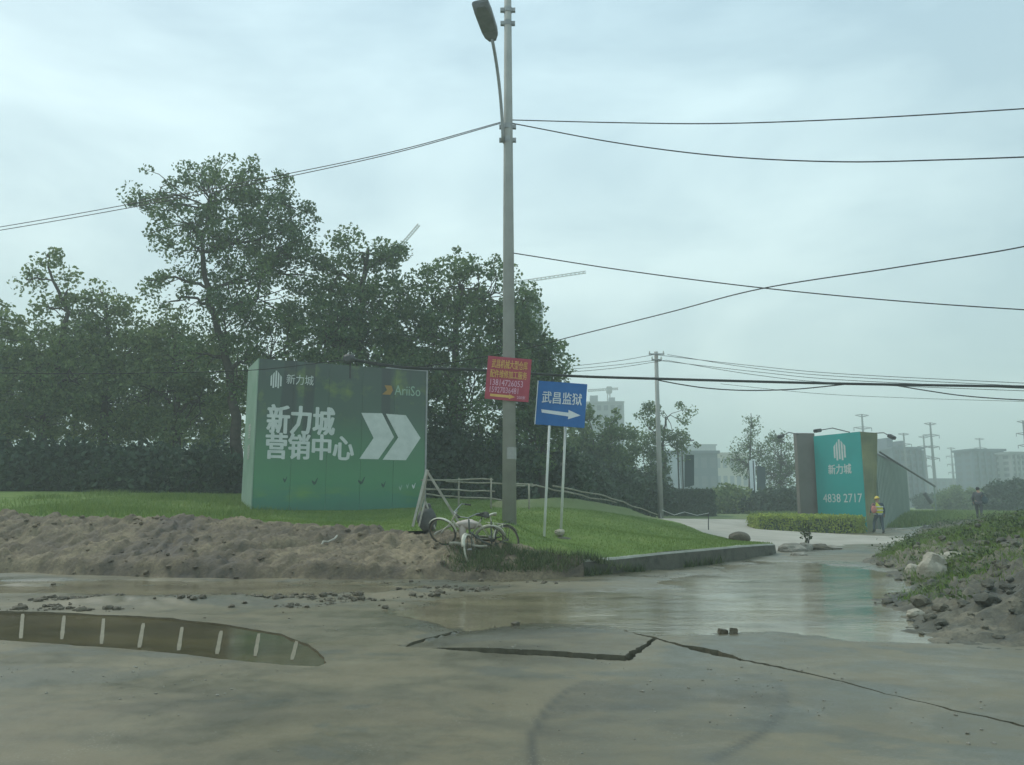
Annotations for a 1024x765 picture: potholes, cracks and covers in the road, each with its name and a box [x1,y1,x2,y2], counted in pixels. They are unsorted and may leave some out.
pothole [0,611,327,666]
